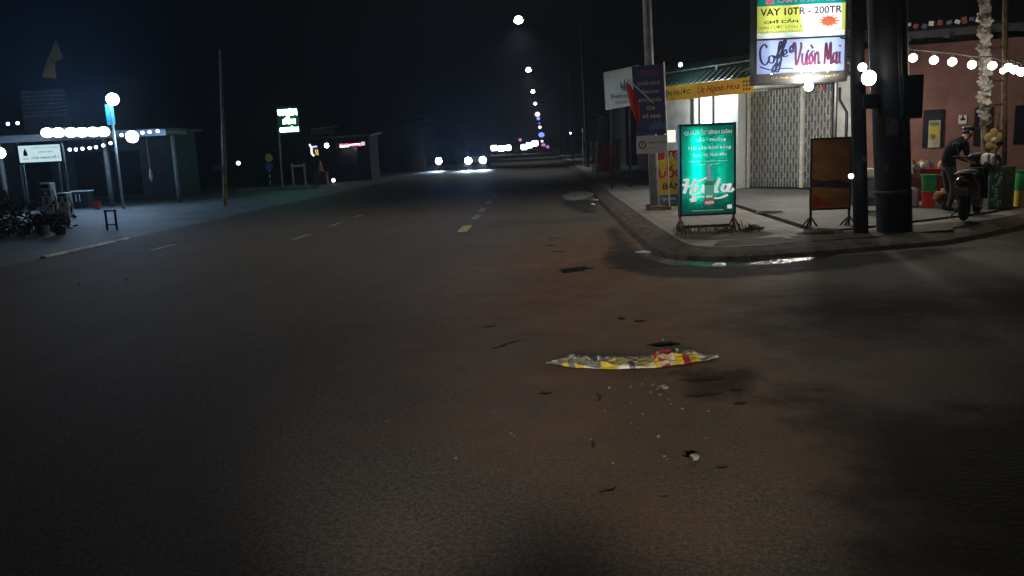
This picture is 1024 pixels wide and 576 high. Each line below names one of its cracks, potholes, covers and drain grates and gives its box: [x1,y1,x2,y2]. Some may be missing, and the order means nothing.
crack [483,325,522,349]
